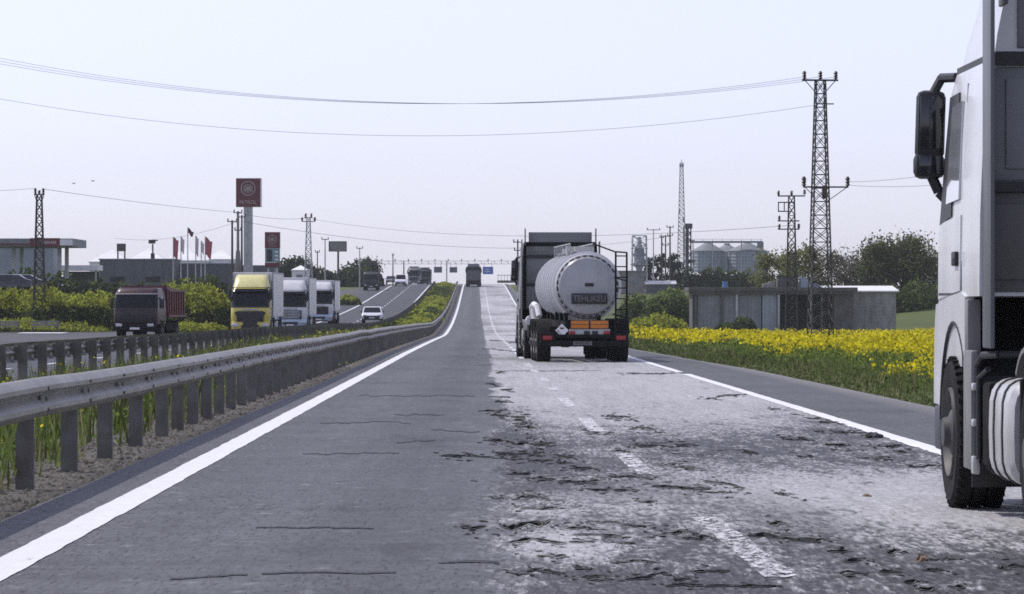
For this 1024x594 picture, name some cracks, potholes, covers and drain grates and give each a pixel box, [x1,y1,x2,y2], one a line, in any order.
crack [171,571,396,579]
crack [818,541,966,594]
crack [302,340,758,584]
